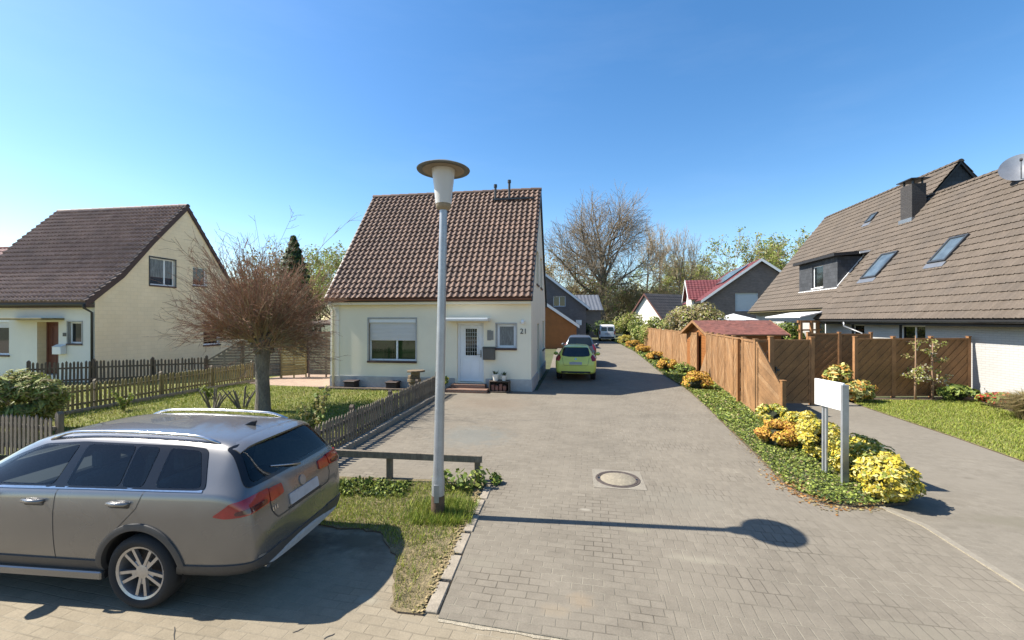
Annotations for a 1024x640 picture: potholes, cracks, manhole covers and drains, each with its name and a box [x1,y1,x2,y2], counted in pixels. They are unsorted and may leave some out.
manhole cover [592,469,647,490]
